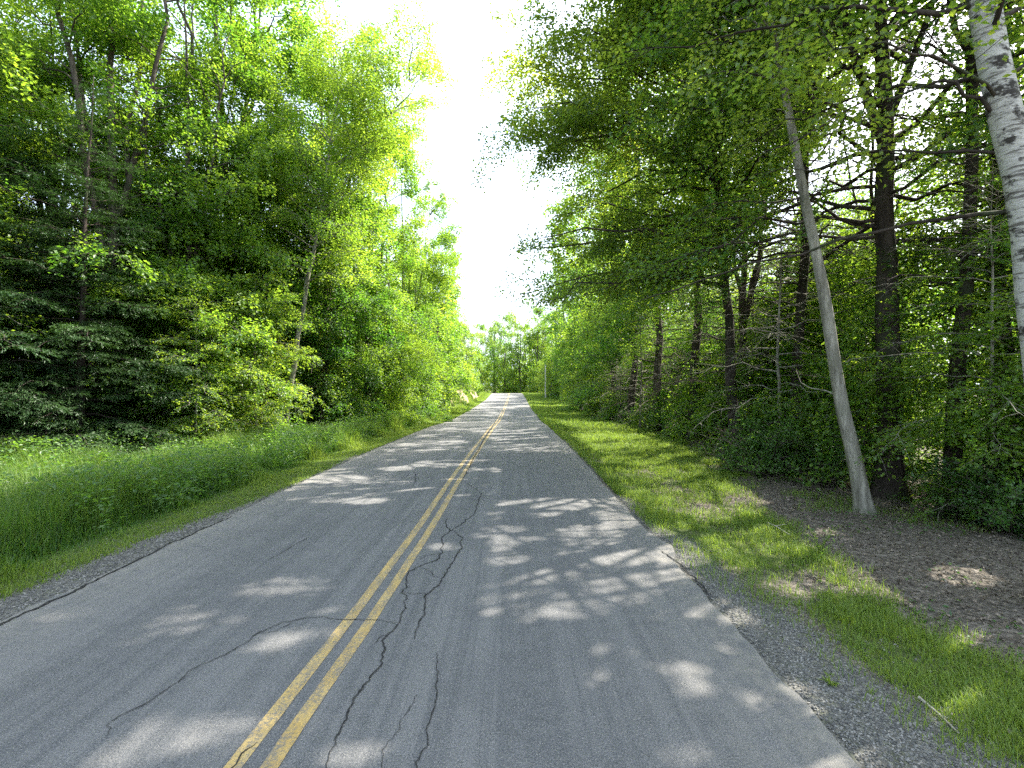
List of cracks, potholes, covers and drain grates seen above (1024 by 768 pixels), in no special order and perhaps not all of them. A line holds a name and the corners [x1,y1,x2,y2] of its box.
crack [104,420,496,768]
